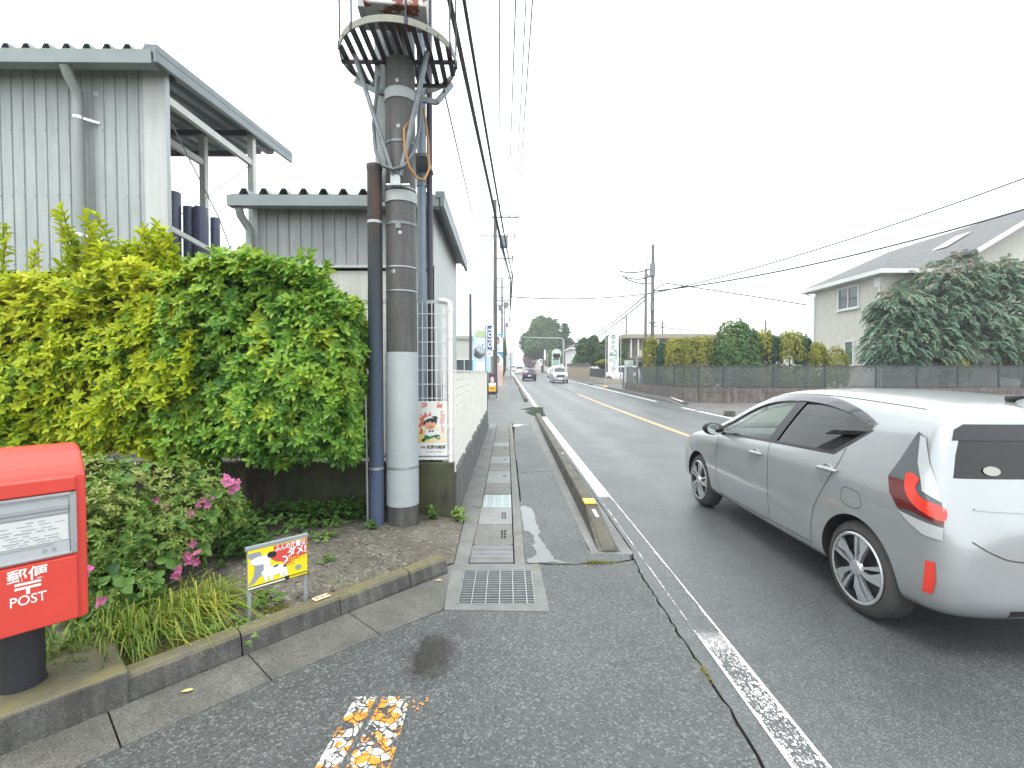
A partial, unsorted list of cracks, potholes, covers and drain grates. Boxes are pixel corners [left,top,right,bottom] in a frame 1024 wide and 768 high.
drain grate [444,564,550,612]
crack [544,464,765,768]
